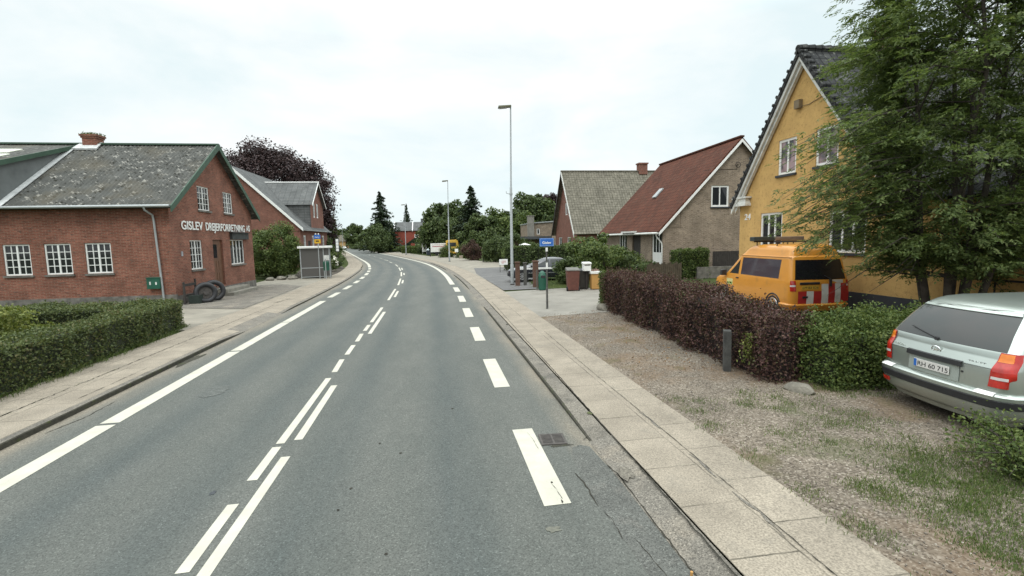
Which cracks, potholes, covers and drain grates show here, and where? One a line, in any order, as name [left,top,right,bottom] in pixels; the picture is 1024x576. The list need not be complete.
crack [552,464,697,576]
drain grate [538,433,568,446]
